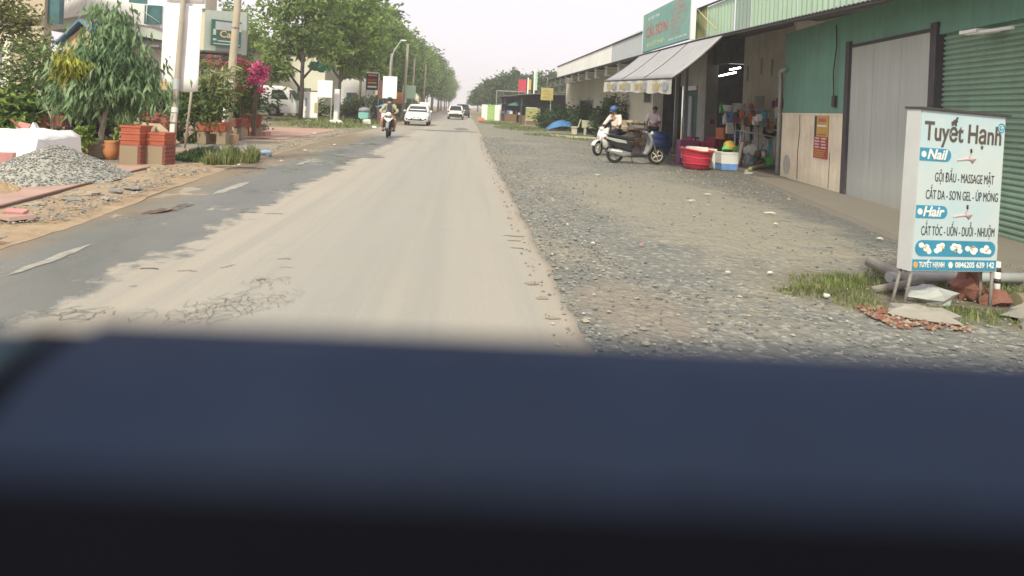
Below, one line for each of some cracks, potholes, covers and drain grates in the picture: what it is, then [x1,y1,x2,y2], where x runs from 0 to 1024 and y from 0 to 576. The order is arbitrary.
crack [35,264,303,324]
pothole [142,205,184,214]
